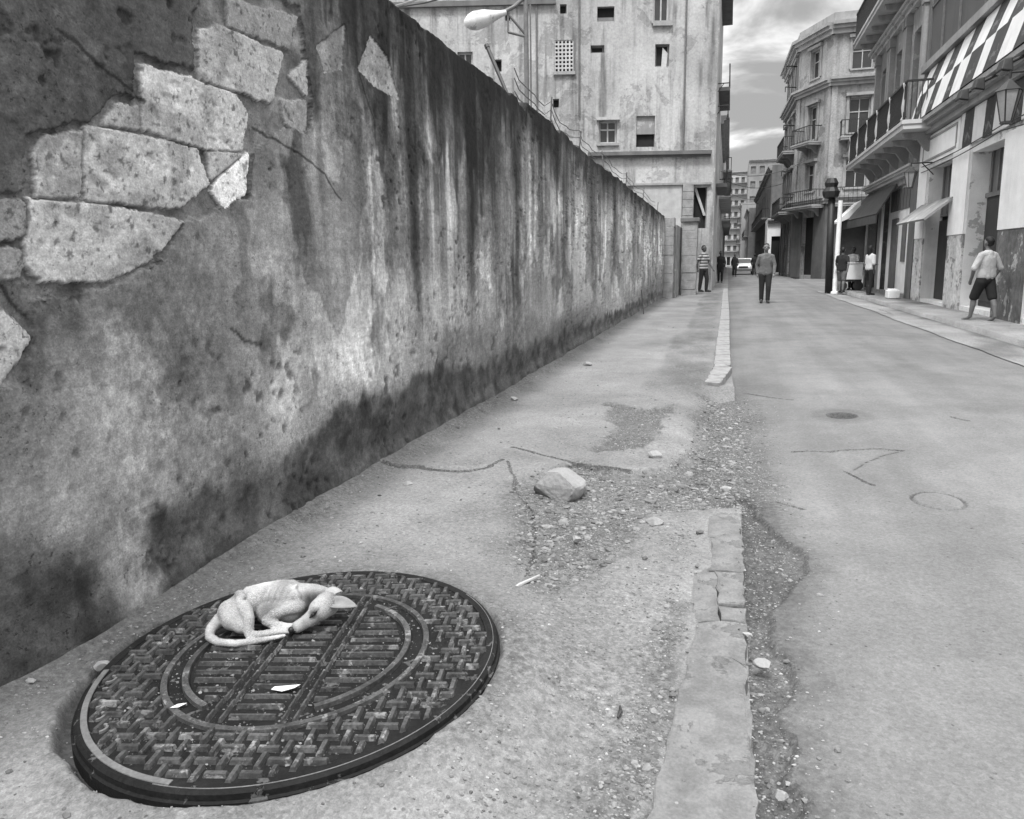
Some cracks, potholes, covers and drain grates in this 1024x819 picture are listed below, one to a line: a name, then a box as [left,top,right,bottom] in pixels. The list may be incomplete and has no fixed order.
crack [380,447,633,566]
pothole [729,496,814,819]
crack [791,448,905,486]
manhole cover [911,492,967,511]
manhole cover [71,571,500,808]
